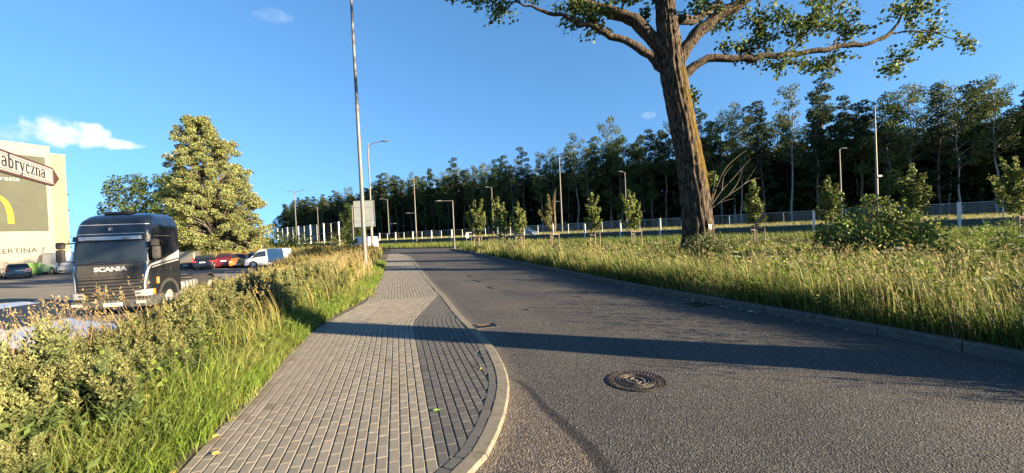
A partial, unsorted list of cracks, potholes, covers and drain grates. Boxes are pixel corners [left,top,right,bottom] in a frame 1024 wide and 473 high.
manhole cover [606,371,666,392]
